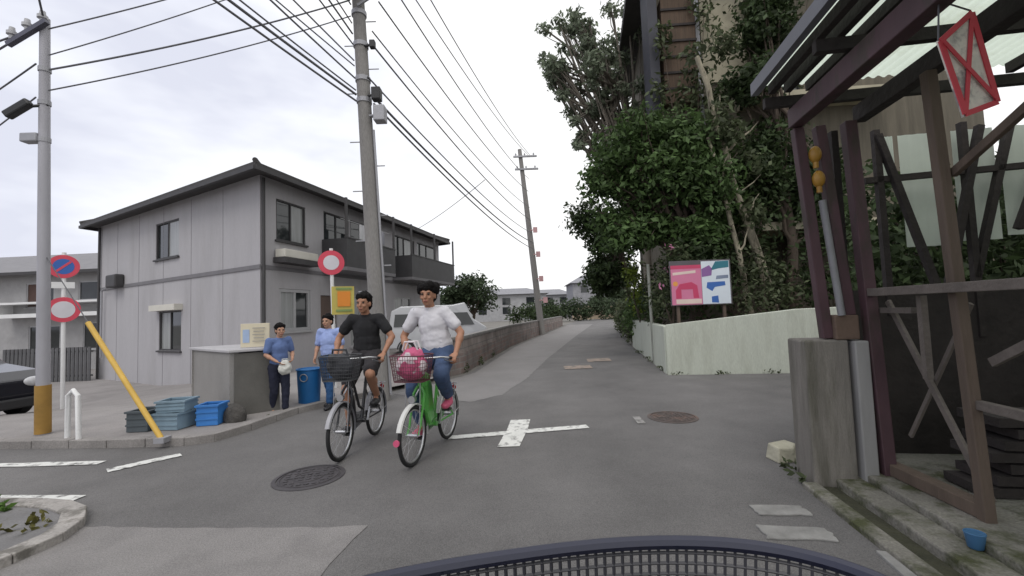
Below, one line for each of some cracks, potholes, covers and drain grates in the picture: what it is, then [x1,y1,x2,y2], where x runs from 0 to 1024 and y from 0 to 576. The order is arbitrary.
manhole cover [271,464,346,491]
manhole cover [647,411,699,424]
